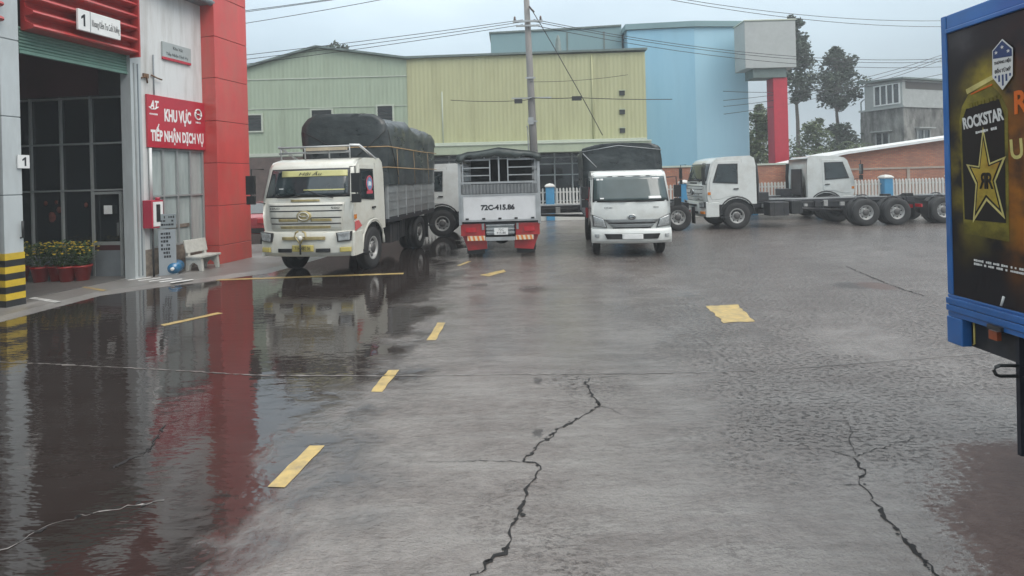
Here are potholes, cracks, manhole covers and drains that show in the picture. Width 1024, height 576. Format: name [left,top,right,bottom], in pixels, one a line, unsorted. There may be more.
crack [429,376,623,576]
crack [106,416,186,468]
crack [0,500,157,561]
crack [817,414,940,576]
